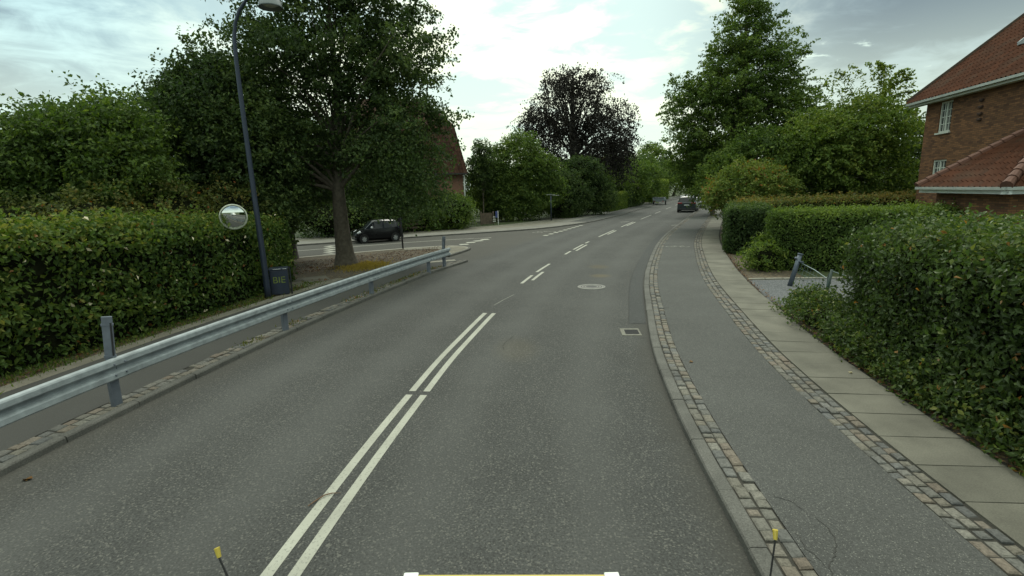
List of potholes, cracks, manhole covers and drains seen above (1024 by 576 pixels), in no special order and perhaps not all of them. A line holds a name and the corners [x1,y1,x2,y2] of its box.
drain grate [620,328,642,336]
crack [778,497,837,576]
